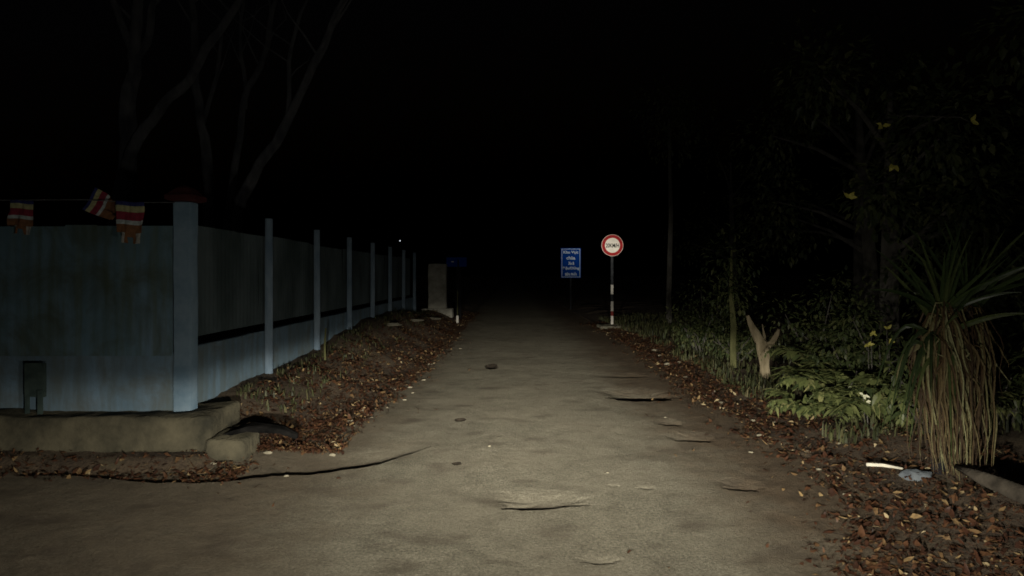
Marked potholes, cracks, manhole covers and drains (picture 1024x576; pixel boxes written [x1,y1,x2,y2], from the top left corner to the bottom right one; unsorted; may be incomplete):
pothole [594,387,682,402]
pothole [663,430,715,443]
pothole [489,489,600,511]
pothole [714,477,767,492]
pothole [573,553,626,565]
pothole [652,418,683,426]
